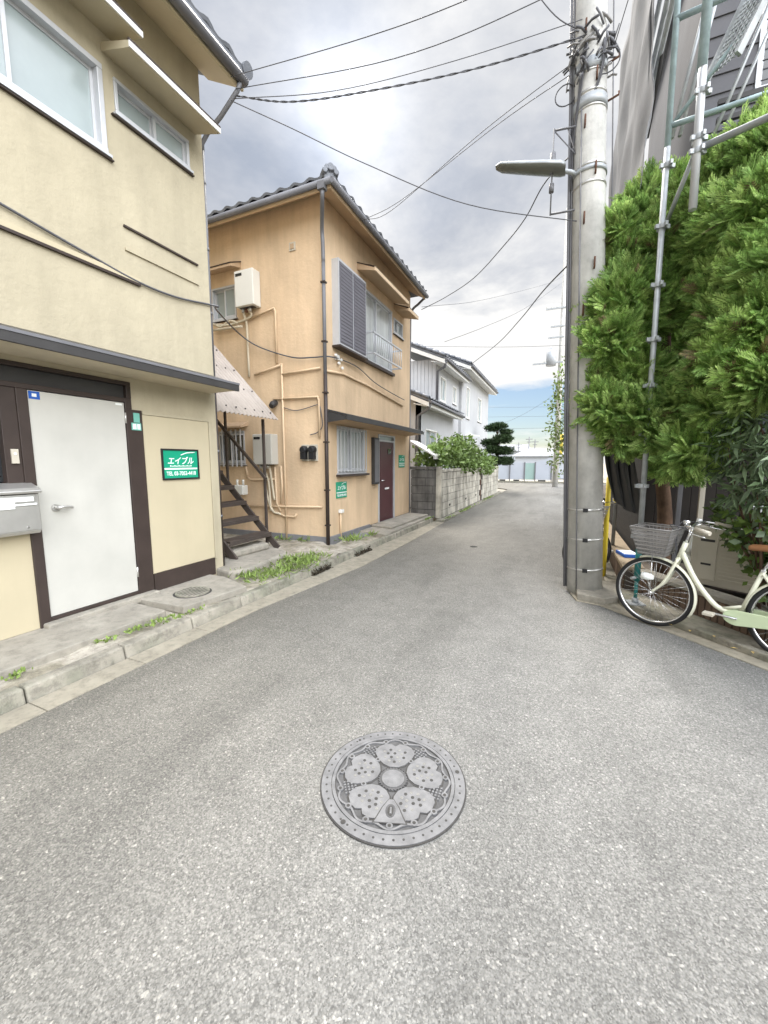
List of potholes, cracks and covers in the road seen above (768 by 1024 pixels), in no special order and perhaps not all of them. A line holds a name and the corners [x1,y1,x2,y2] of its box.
manhole cover [173,586,212,598]
manhole cover [320,731,467,849]
